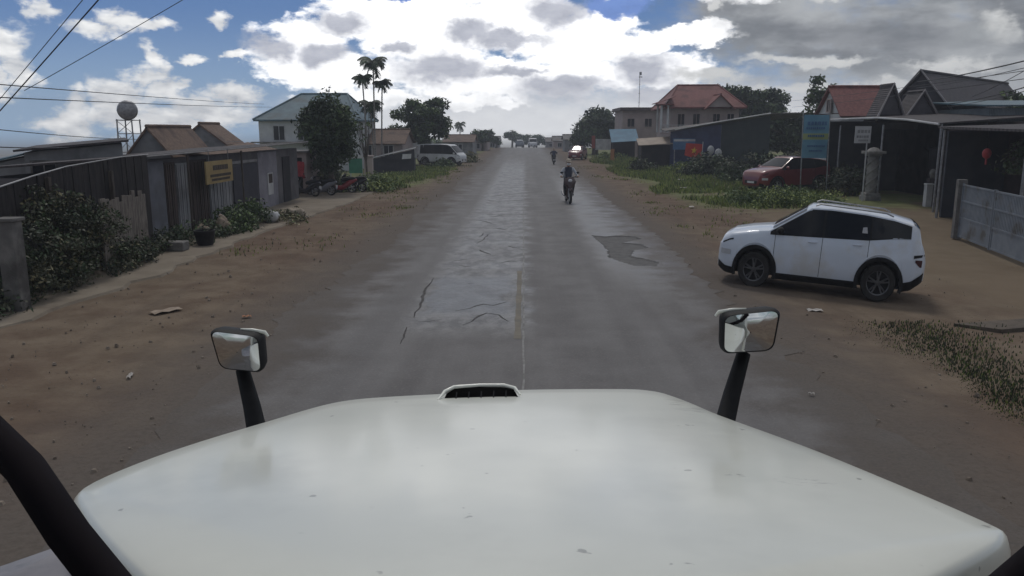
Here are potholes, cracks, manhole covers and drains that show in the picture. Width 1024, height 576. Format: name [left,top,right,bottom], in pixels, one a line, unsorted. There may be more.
crack [457,302,507,325]
crack [456,195,519,284]
